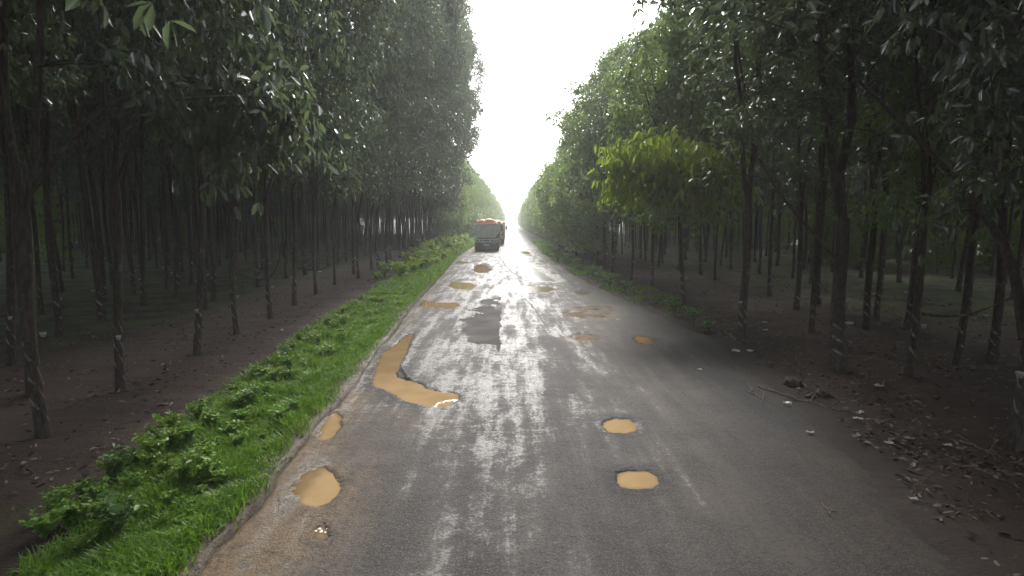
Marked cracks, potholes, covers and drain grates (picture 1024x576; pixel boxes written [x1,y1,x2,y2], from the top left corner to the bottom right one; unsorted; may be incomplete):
pothole [464,262,499,274]
pothole [441,282,484,290]
pothole [548,303,634,321]
pothole [623,333,664,346]
pothole [587,414,652,439]
pothole [355,331,476,413]
pothole [414,300,469,309]
pothole [308,408,353,445]
pothole [601,463,676,496]
pothole [276,459,362,517]
